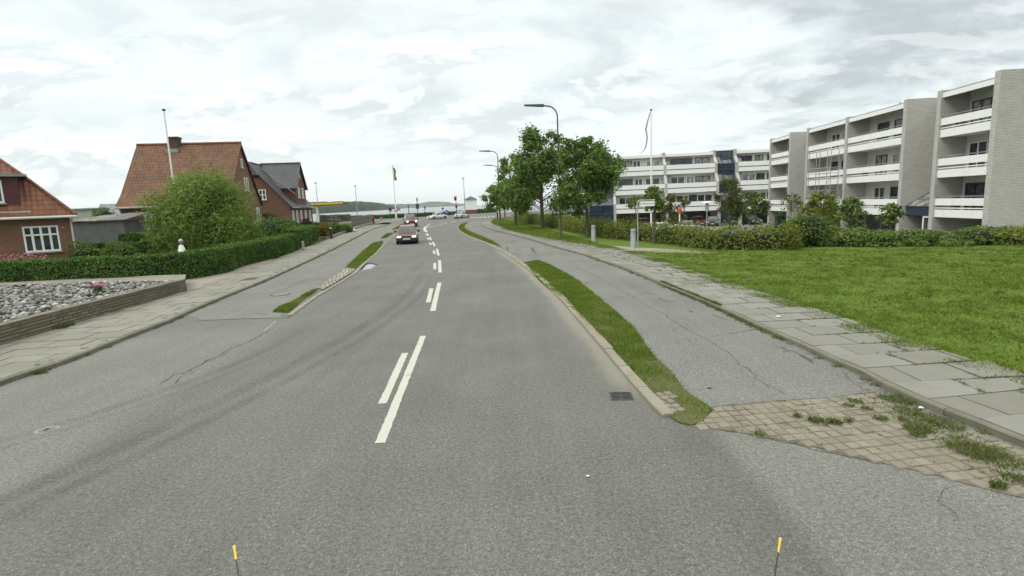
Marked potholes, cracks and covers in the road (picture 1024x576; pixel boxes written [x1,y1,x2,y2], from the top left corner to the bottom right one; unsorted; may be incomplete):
crack [162,331,268,383]
crack [582,269,784,394]
drain grate [609,392,634,401]
manhole cover [33,425,60,434]
